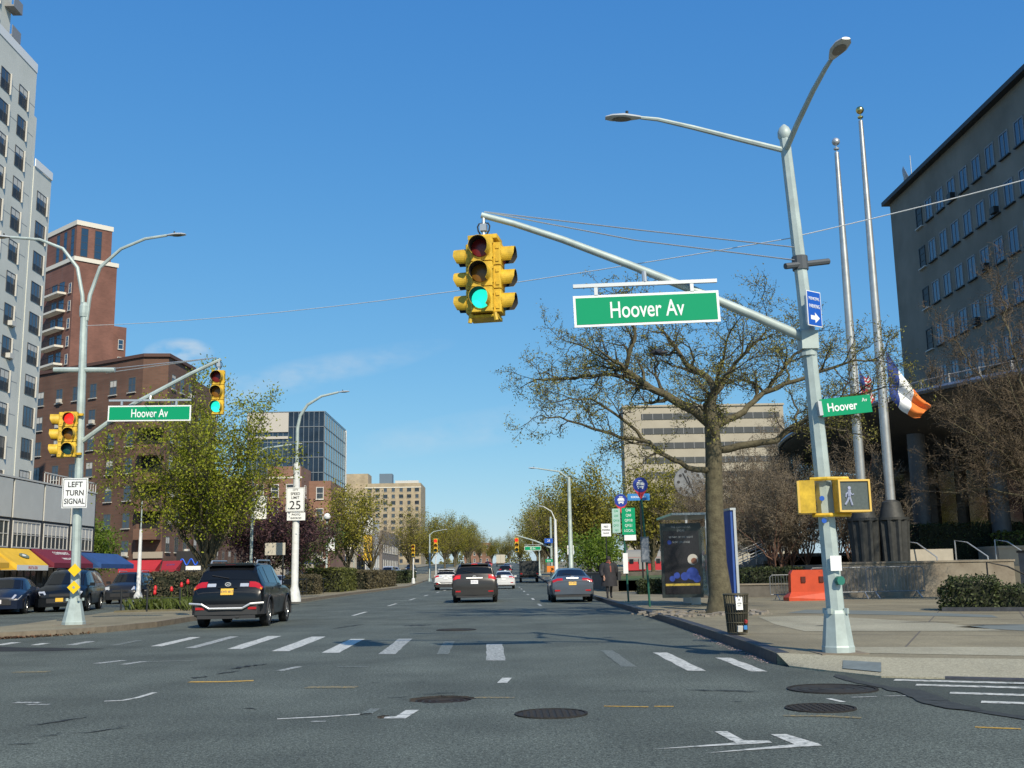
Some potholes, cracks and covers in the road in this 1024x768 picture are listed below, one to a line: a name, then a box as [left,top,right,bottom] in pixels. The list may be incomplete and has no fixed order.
manhole cover [515,708,588,719]
manhole cover [785,703,857,713]
manhole cover [787,683,879,694]
